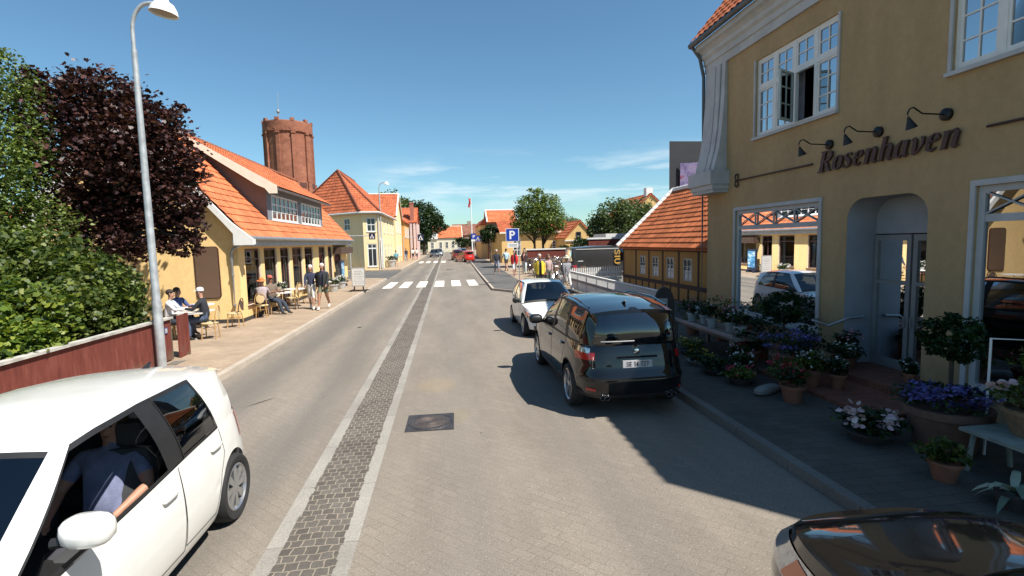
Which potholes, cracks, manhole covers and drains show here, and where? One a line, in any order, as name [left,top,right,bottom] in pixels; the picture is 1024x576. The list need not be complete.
manhole cover [405,413,454,433]
